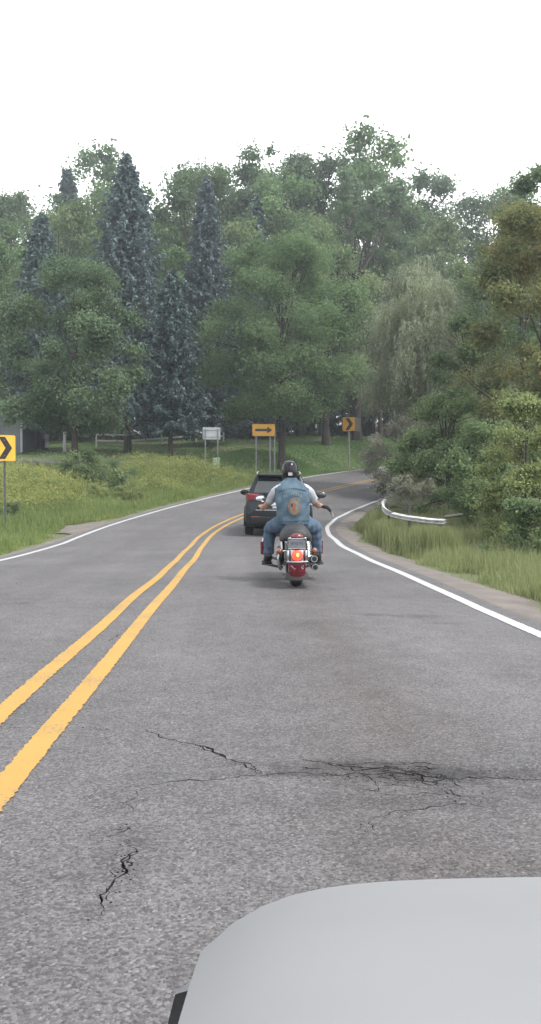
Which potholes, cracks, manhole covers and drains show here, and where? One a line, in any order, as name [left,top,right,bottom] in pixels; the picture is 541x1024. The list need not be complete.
crack [86,787,149,921]
crack [129,728,538,832]
